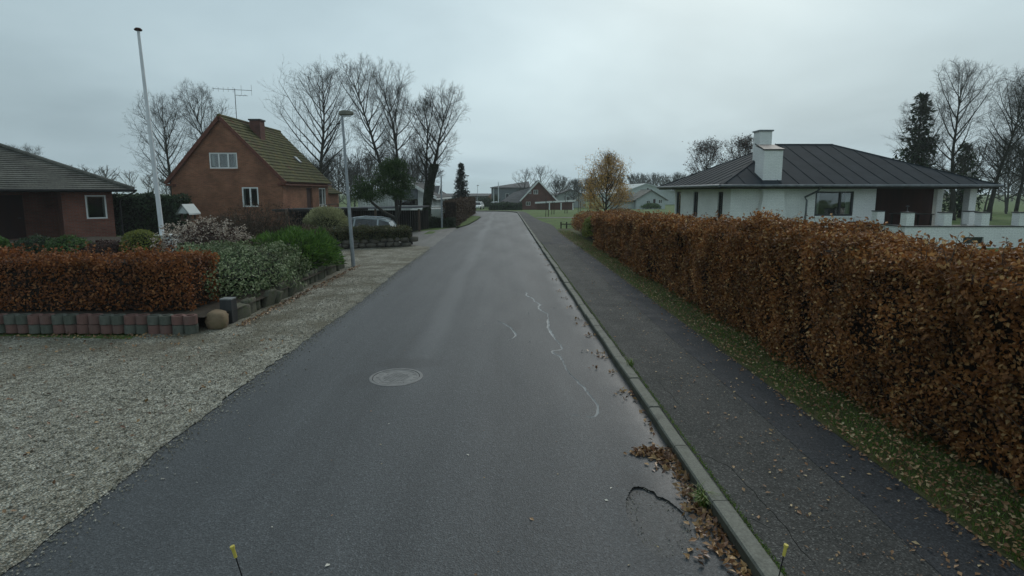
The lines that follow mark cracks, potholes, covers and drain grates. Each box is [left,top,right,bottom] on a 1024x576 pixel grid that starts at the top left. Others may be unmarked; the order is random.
manhole cover [369,368,423,387]
pothole [625,486,692,558]
crack [499,292,599,418]
